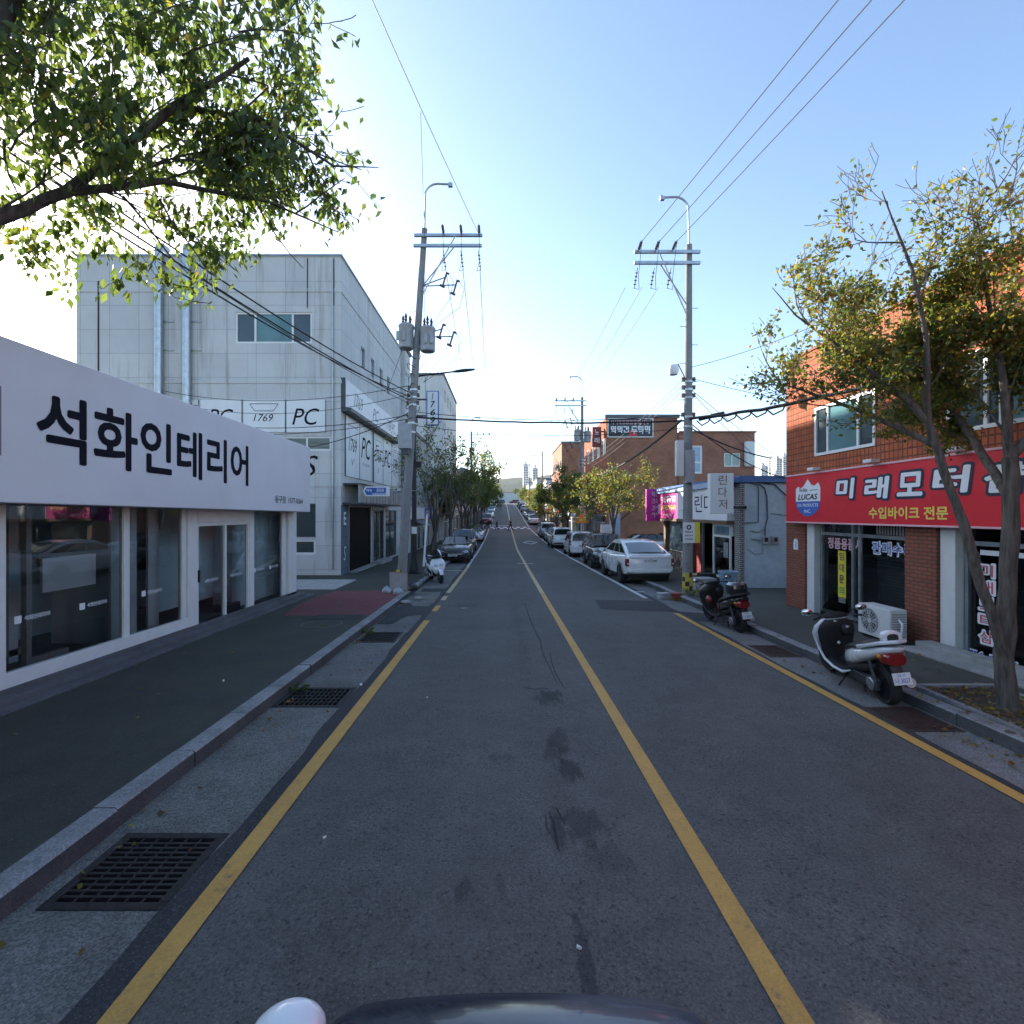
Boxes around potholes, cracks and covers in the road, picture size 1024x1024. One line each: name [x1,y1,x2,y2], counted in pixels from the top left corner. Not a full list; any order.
manhole cover [300,620,343,629]
drain grate [356,632,404,643]
drain grate [747,645,802,657]
crack [525,604,565,689]
drain grate [863,707,966,732]
drain grate [35,833,229,911]
drain grate [271,687,356,708]
